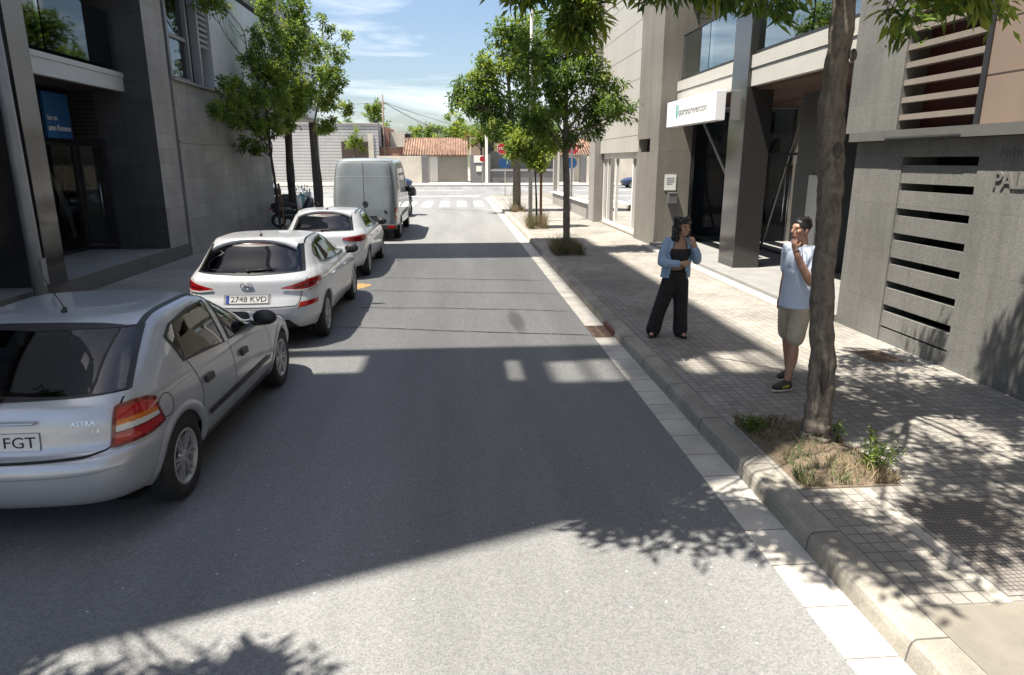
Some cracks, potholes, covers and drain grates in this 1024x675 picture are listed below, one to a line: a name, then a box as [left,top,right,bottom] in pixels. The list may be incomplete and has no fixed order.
drain grate [585,321,615,338]
manhole cover [852,350,904,362]
